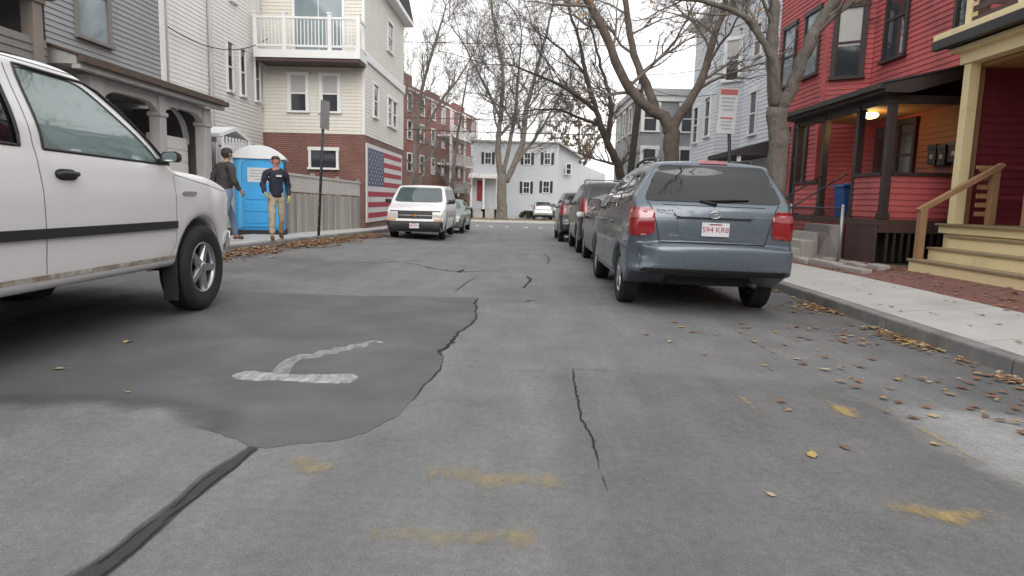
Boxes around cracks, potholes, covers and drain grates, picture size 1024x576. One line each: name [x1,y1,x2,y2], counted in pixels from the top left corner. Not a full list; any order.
crack [353,260,664,487]
